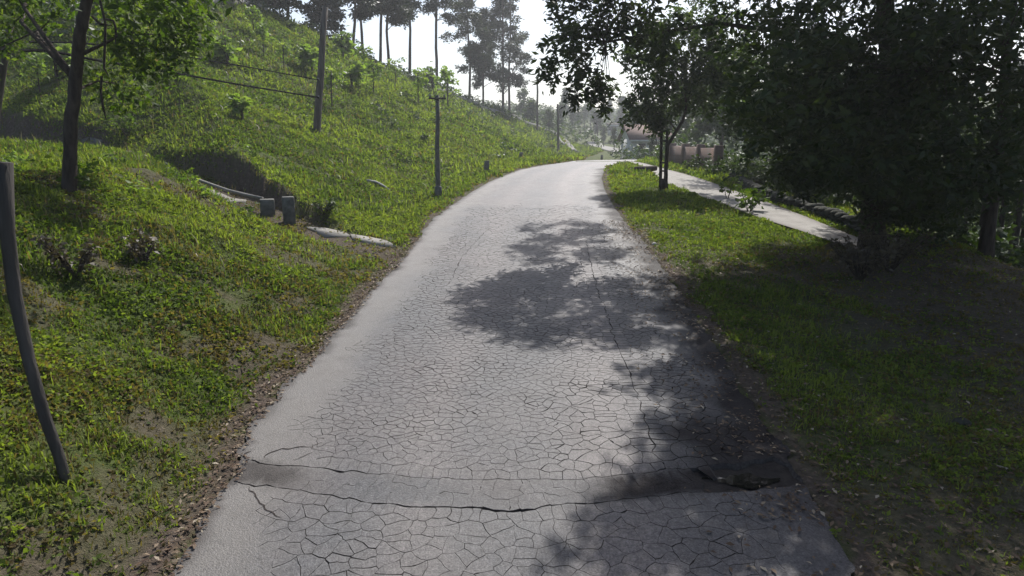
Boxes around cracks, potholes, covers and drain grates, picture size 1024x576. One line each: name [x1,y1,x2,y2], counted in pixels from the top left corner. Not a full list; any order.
crack [235,203,786,576]
pothole [668,454,813,499]
